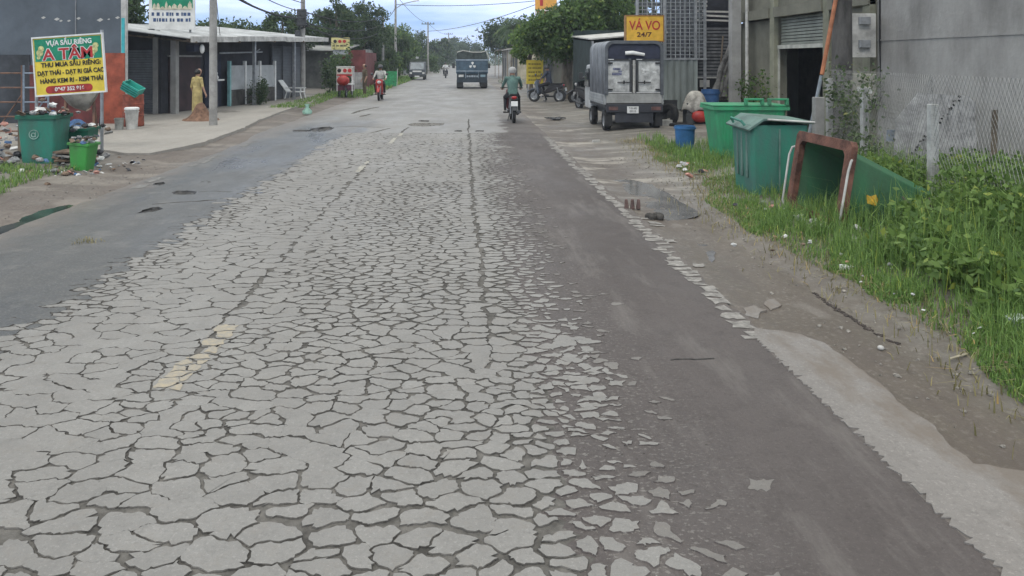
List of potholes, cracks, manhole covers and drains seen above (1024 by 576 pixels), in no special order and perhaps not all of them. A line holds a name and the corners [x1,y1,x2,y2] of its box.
crack [0,133,799,576]
